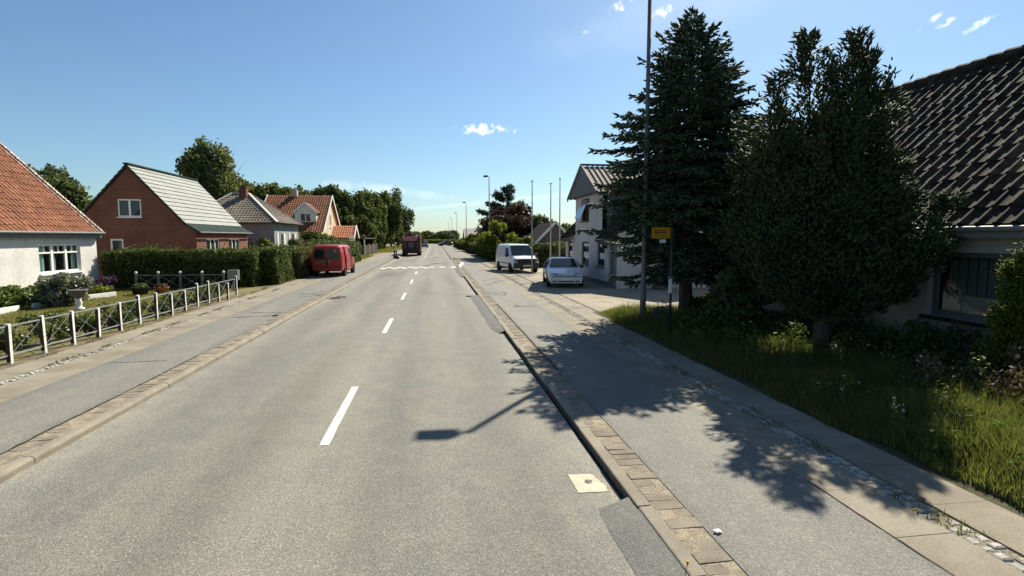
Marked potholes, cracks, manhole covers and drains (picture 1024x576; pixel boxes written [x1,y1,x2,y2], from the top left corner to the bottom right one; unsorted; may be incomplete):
utility cover [568,474,609,493]
